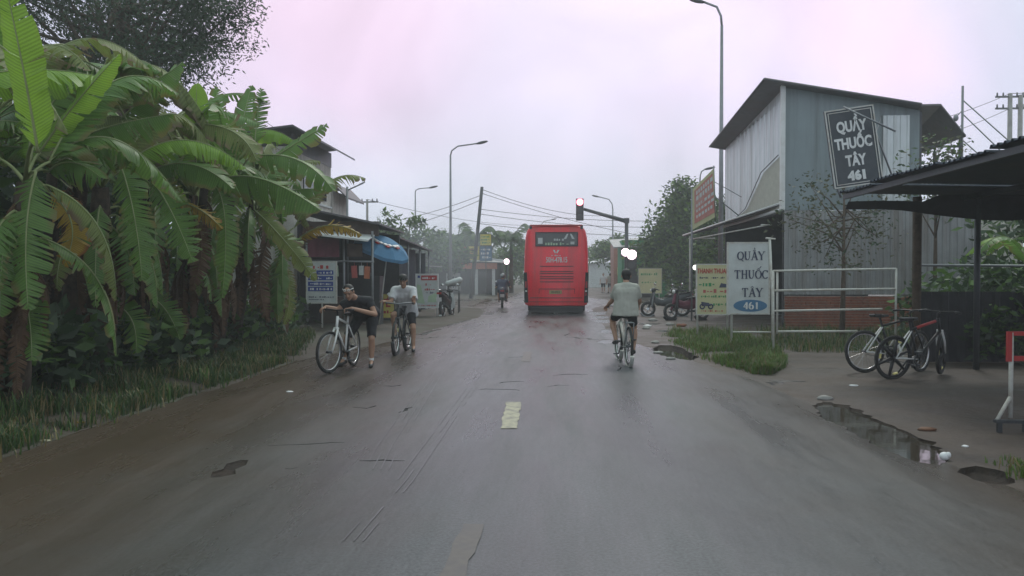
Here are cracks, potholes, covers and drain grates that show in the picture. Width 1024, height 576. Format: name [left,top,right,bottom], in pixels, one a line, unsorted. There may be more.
pothole [210,460,248,478]
pothole [653,345,699,360]
pothole [958,466,1015,485]
pothole [812,402,948,465]
